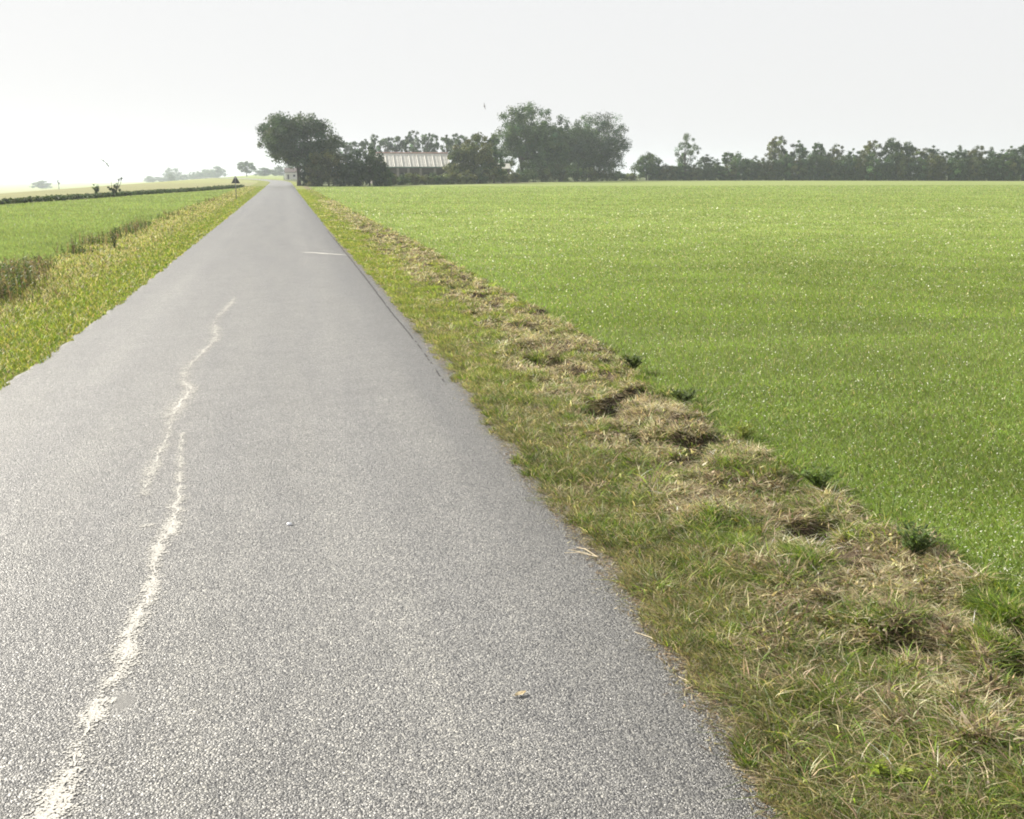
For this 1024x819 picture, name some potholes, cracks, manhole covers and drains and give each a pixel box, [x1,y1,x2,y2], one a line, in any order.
crack [19,297,236,819]
